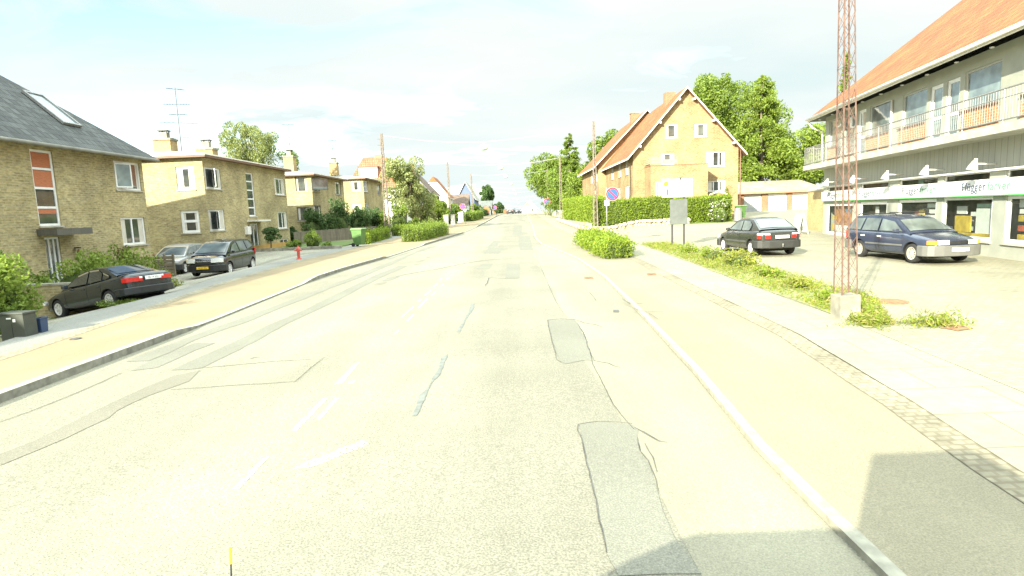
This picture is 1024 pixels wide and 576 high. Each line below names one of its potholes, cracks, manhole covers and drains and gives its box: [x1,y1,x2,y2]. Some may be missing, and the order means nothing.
crack [547,319,618,367]
